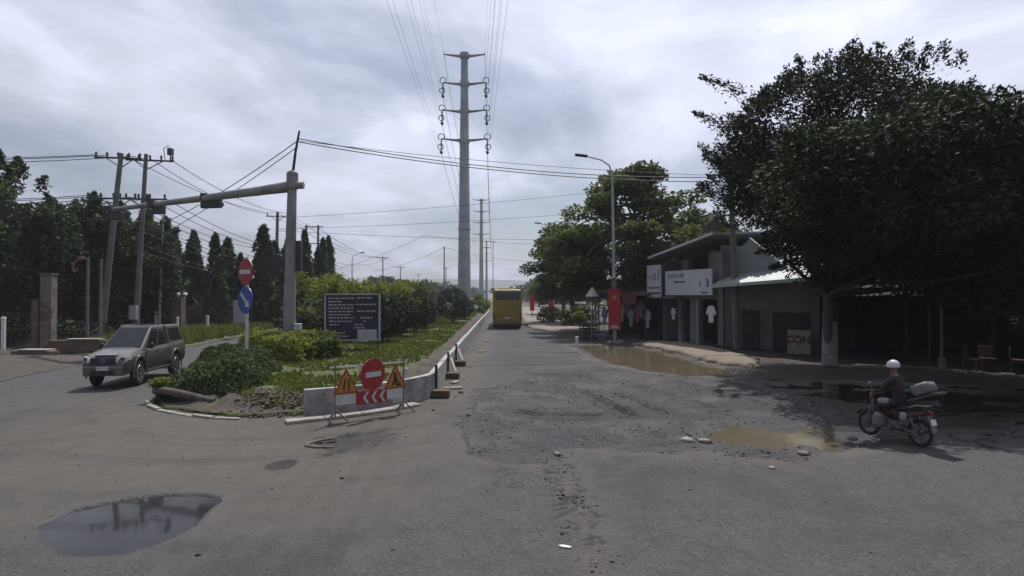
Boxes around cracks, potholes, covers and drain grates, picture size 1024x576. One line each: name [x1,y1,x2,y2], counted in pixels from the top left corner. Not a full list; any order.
pothole [448,364,908,465]
pothole [31,493,224,558]
pothole [265,459,299,471]
